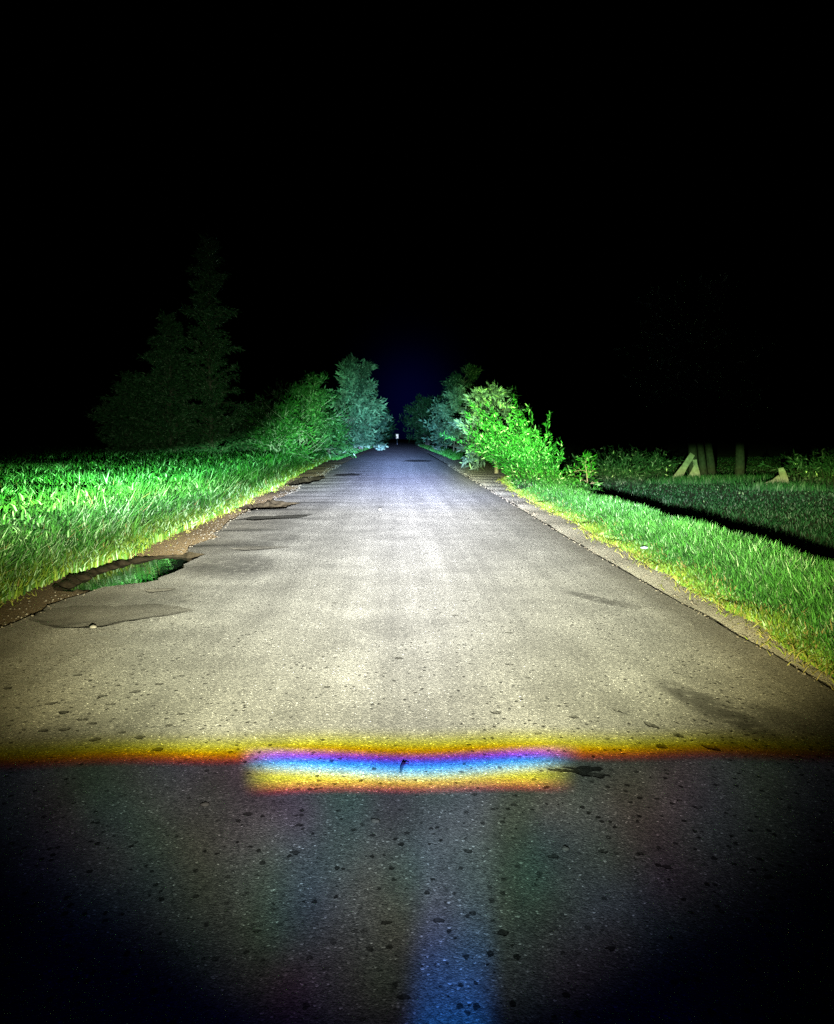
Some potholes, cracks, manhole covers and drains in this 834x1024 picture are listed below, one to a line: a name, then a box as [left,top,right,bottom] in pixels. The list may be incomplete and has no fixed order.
pothole [287,476,325,485]
pothole [240,500,300,510]
pothole [52,551,205,592]
